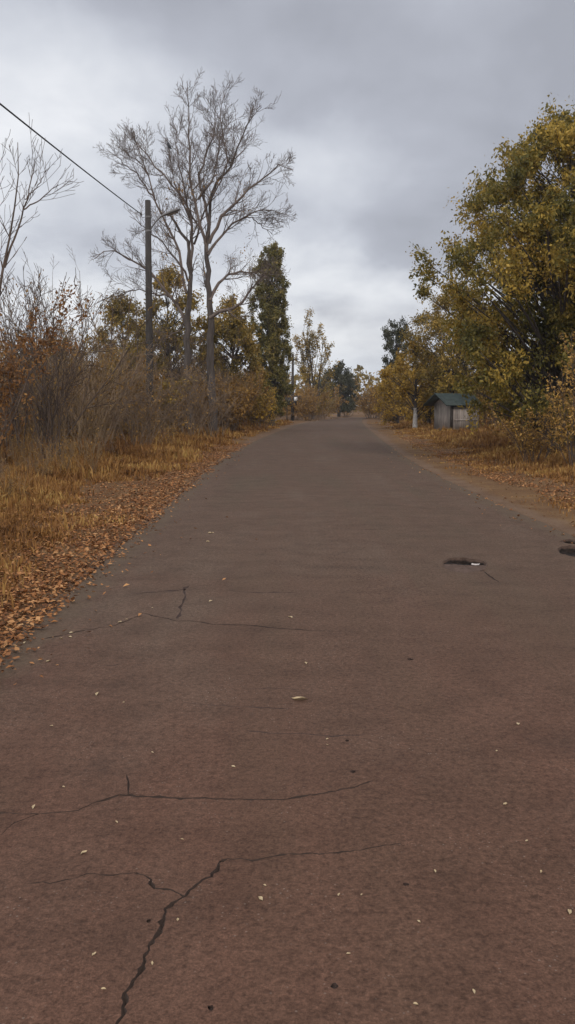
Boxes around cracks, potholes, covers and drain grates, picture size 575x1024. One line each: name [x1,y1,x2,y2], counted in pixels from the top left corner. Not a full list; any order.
pothole [437,556,490,573]
crack [44,586,338,639]
crack [0,774,373,834]
crack [33,843,401,1024]
